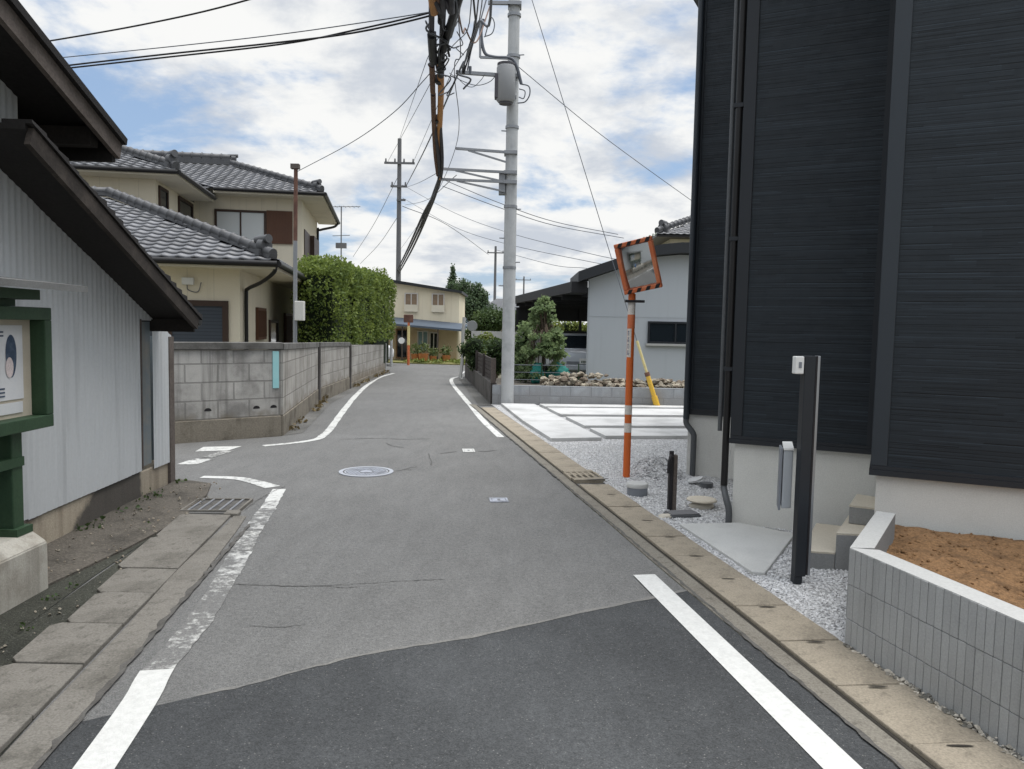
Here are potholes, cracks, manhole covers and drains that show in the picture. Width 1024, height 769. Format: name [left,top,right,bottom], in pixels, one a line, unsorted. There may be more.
crack [228,579,432,588]
manhole cover [339,466,394,477]
drain grate [179,498,253,517]
